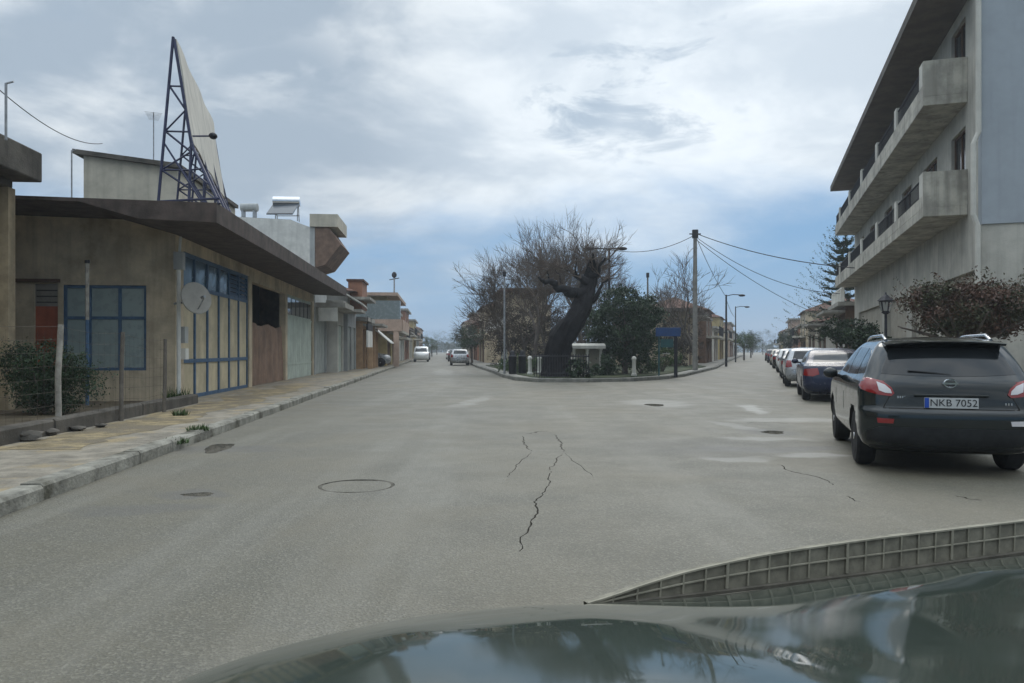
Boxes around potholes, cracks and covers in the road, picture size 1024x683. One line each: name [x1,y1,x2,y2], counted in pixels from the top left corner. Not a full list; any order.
crack [507,431,592,551]
manhole cover [318,479,395,493]
